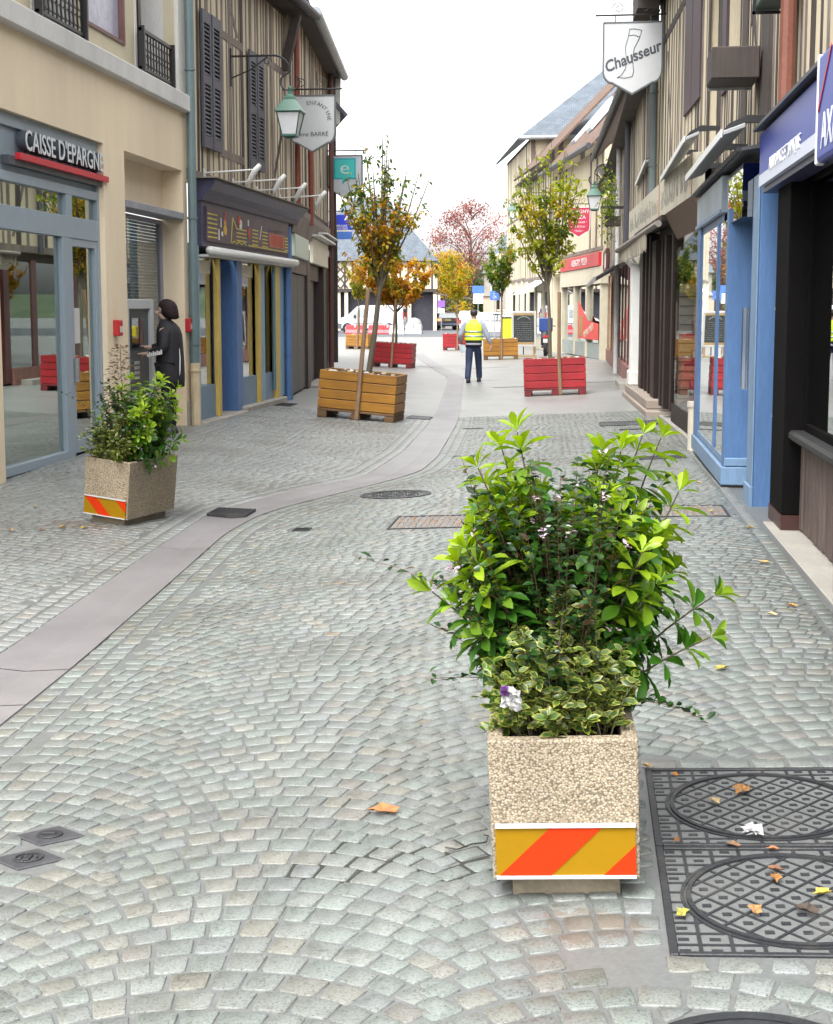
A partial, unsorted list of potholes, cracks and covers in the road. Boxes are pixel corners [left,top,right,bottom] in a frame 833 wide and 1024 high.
manhole cover [387,514,466,530]
manhole cover [645,767,833,847]
manhole cover [360,490,431,499]
manhole cover [668,1011,821,1024]
manhole cover [655,846,833,959]
manhole cover [649,505,731,518]
manhole cover [17,826,84,847]
manhole cover [0,848,64,871]
